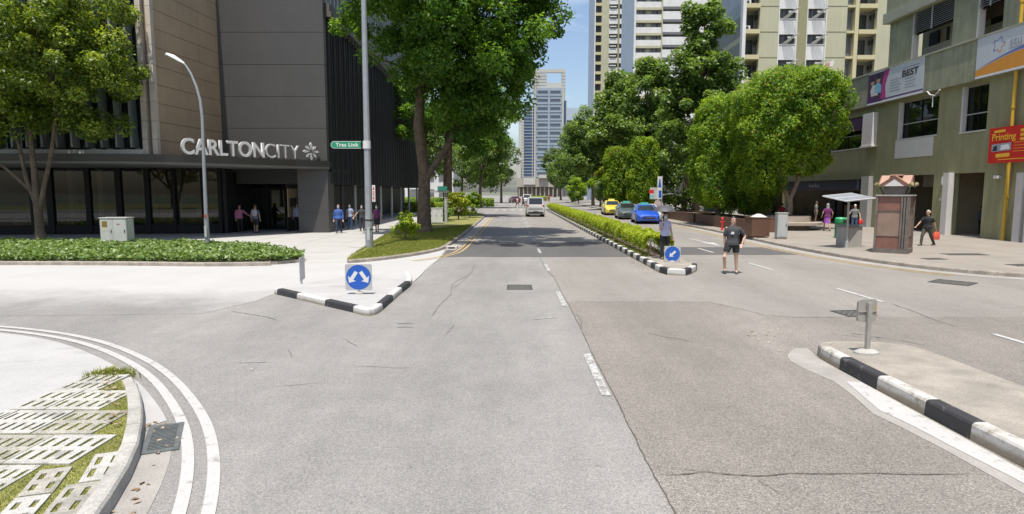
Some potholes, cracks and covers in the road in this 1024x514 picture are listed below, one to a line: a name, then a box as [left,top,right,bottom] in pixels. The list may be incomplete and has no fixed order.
crack [661,468,967,493]
crack [417,261,474,334]
drain grate [140,422,184,455]
